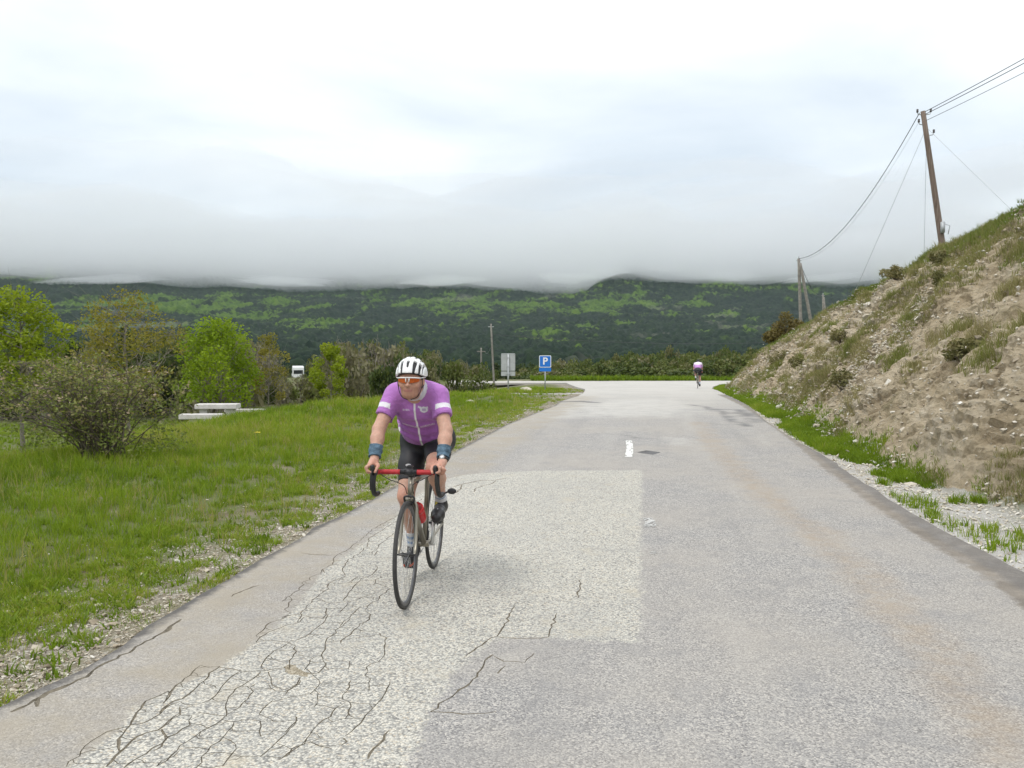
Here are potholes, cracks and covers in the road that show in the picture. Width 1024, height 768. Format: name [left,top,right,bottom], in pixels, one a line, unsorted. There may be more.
crack [430,605,557,715]
crack [10,498,423,768]
